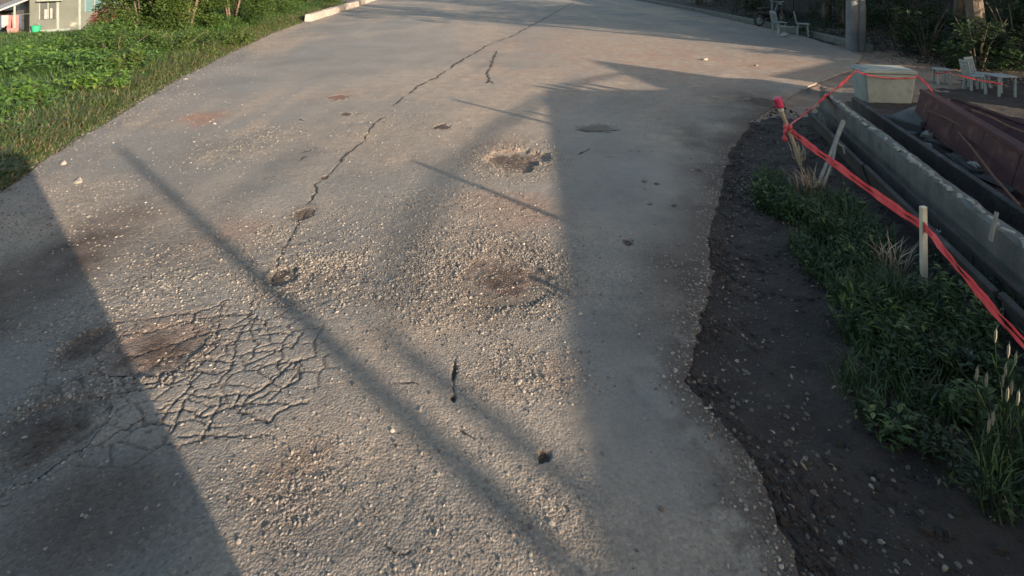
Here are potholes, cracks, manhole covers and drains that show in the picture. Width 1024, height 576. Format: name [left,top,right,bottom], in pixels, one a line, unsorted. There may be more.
crack [274,223,299,273]
pothole [457,258,549,308]
pothole [266,268,297,287]
pothole [537,449,552,464]
crack [308,2,574,203]
crack [99,299,304,445]
pothole [293,207,315,222]
pothole [484,149,550,173]
